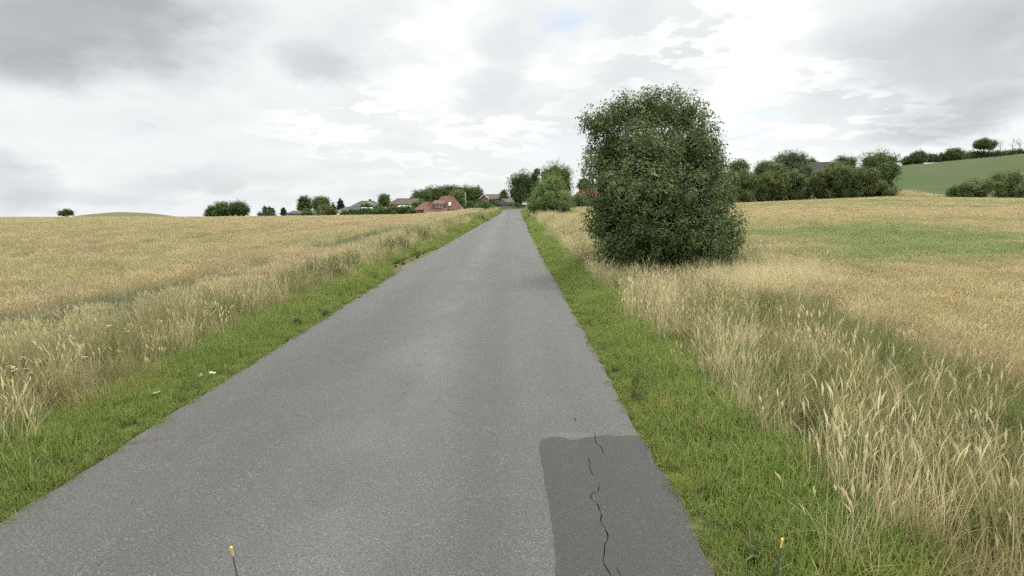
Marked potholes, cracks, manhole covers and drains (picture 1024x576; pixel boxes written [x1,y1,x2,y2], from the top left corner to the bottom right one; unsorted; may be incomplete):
crack [588,434,621,576]
